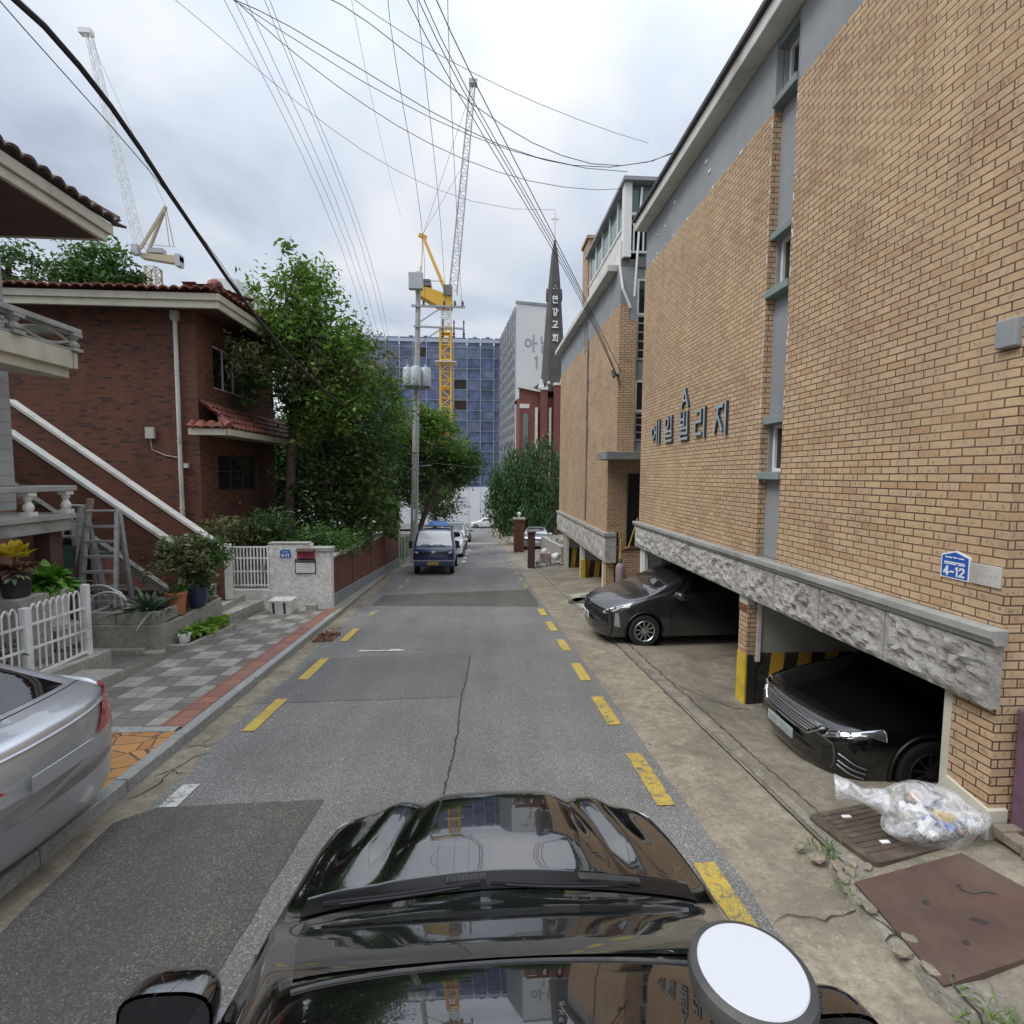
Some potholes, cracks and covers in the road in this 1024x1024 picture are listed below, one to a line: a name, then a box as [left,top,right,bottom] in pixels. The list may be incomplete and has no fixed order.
crack [775,904,983,1024]
drain grate [311,626,343,643]
manhole cover [854,853,1024,988]
crack [331,654,471,795]
crack [126,736,218,799]
